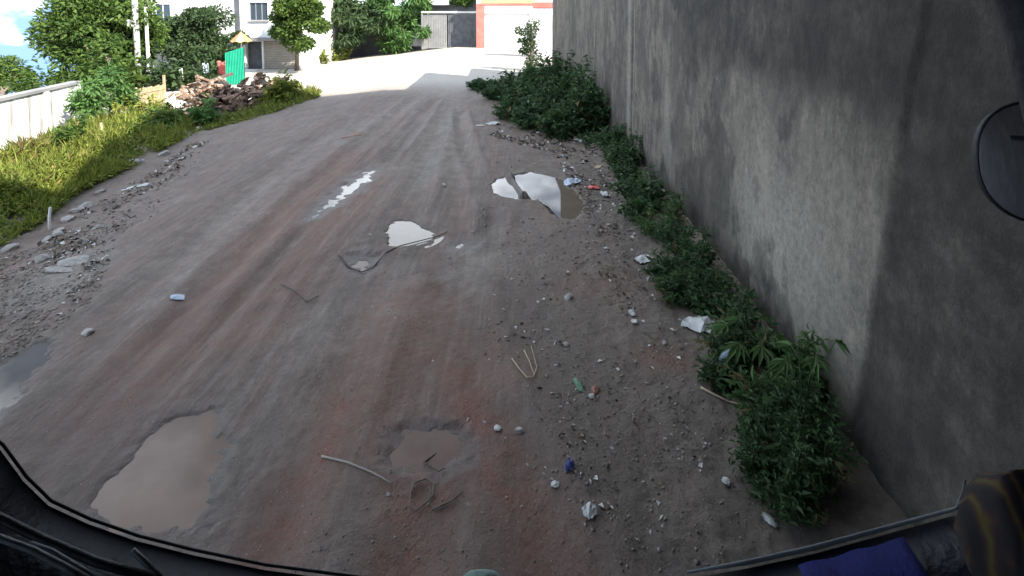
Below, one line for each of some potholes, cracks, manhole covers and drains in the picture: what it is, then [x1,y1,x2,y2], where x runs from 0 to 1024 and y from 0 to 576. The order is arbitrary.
pothole [382,416,482,478]
pothole [491,172,586,219]
pothole [343,250,385,275]
pothole [386,218,444,248]
pothole [90,404,237,540]
